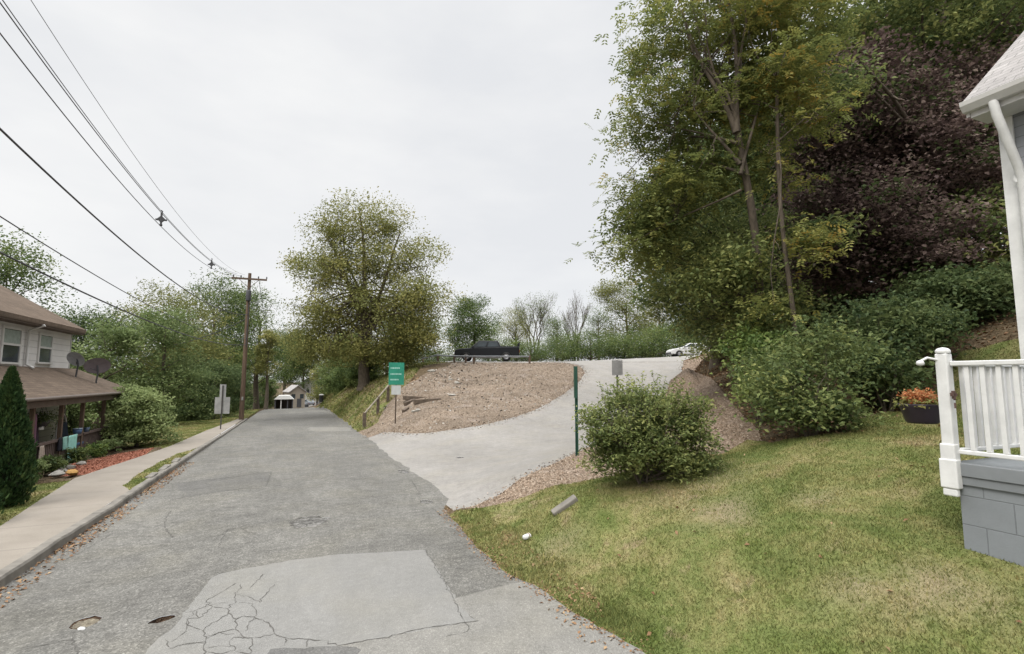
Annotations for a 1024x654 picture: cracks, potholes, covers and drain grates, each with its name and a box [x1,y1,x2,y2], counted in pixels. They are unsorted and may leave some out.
pothole [148,615,176,624]
pothole [68,616,102,630]
crack [166,553,479,654]
